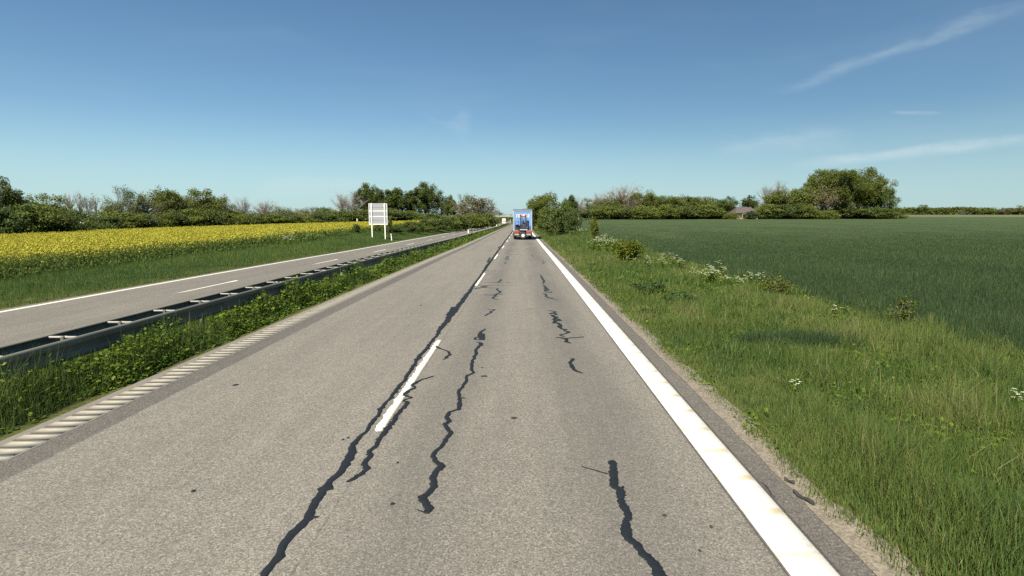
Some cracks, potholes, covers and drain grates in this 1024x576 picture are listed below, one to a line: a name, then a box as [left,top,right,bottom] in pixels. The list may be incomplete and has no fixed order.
crack [474,270,510,295]
